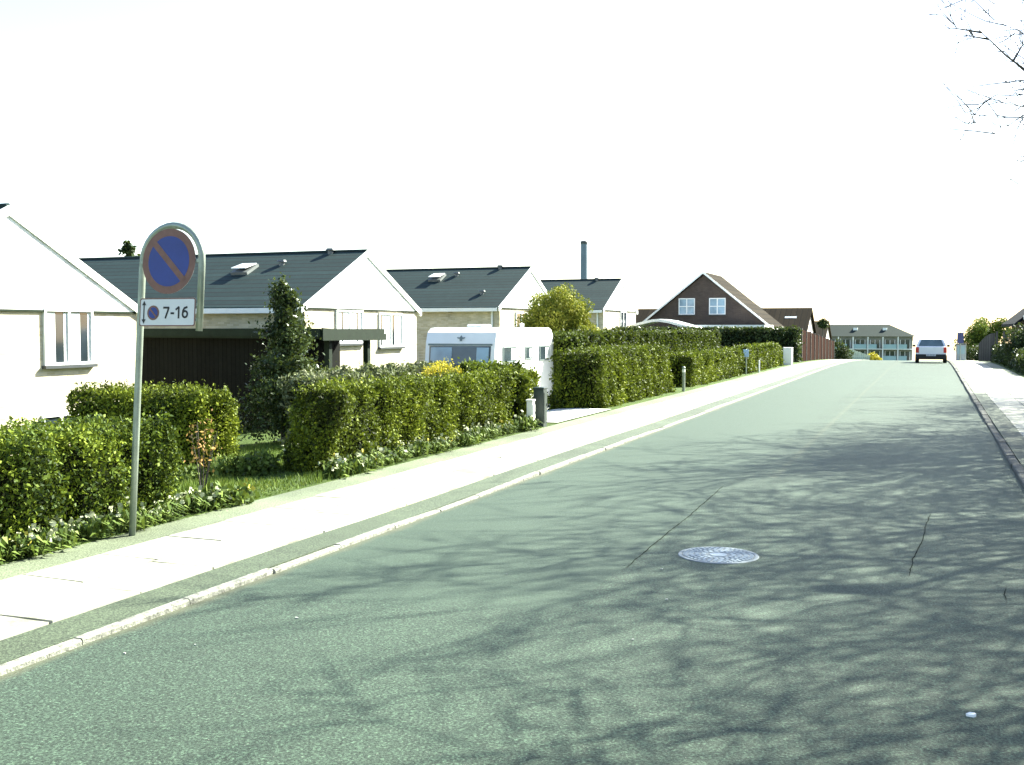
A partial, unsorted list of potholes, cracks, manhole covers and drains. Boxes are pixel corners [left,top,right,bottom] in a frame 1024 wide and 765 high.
crack [908,517,929,577]
manhole cover [678,547,759,564]
